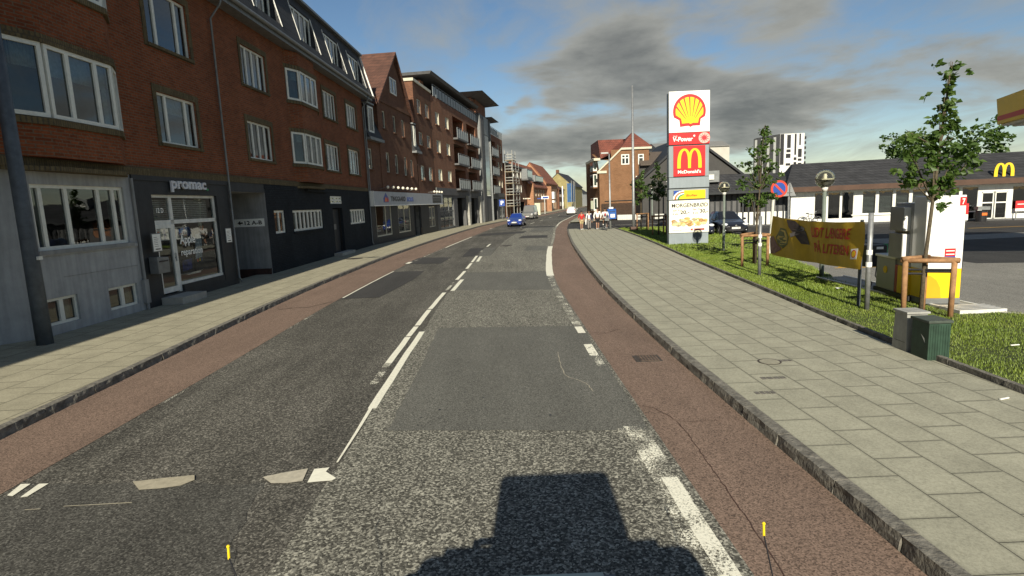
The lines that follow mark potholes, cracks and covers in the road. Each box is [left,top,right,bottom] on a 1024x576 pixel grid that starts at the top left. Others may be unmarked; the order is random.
crack [640,405,785,576]
